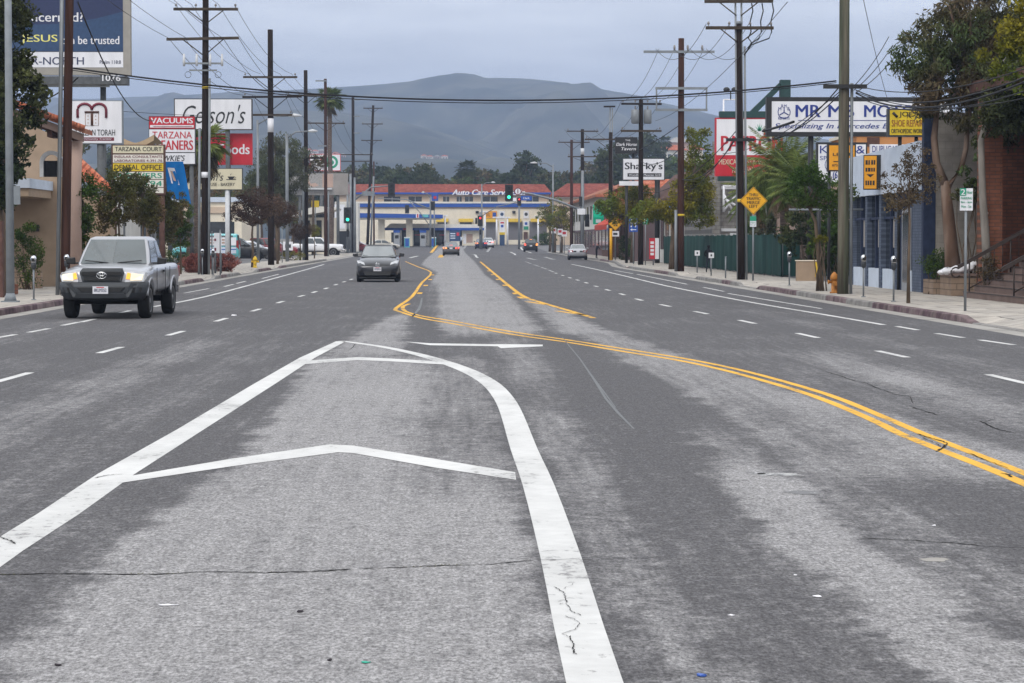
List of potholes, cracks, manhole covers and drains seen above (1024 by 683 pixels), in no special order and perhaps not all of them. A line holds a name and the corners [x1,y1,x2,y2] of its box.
crack [1,557,632,575]
crack [556,583,597,654]
crack [870,538,1023,548]
